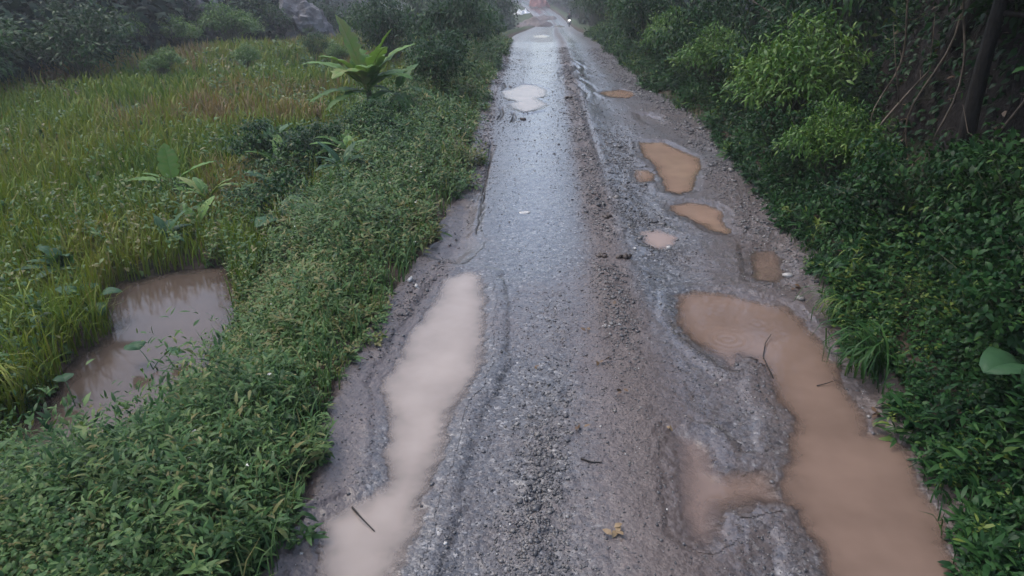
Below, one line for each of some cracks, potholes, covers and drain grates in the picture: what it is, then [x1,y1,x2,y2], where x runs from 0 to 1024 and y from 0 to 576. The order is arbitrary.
pothole [634,226,688,251]
pothole [634,139,707,195]
pothole [598,88,640,98]
pothole [668,286,970,576]
pothole [741,243,796,287]
pothole [498,84,550,112]
pothole [665,198,740,236]
pothole [294,266,497,576]
